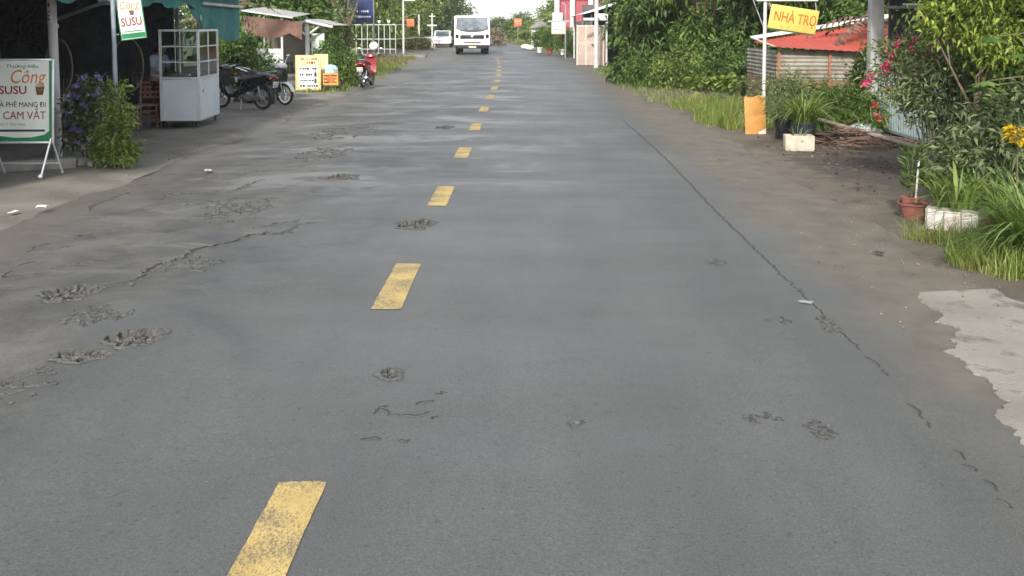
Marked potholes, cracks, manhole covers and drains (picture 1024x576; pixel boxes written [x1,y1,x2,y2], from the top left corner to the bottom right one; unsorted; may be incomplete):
crack [0,170,315,326]
crack [360,391,447,443]
pothole [98,327,172,350]
pothole [36,284,109,303]
pothole [394,218,439,230]
pothole [47,348,116,364]
pothole [372,367,404,381]
